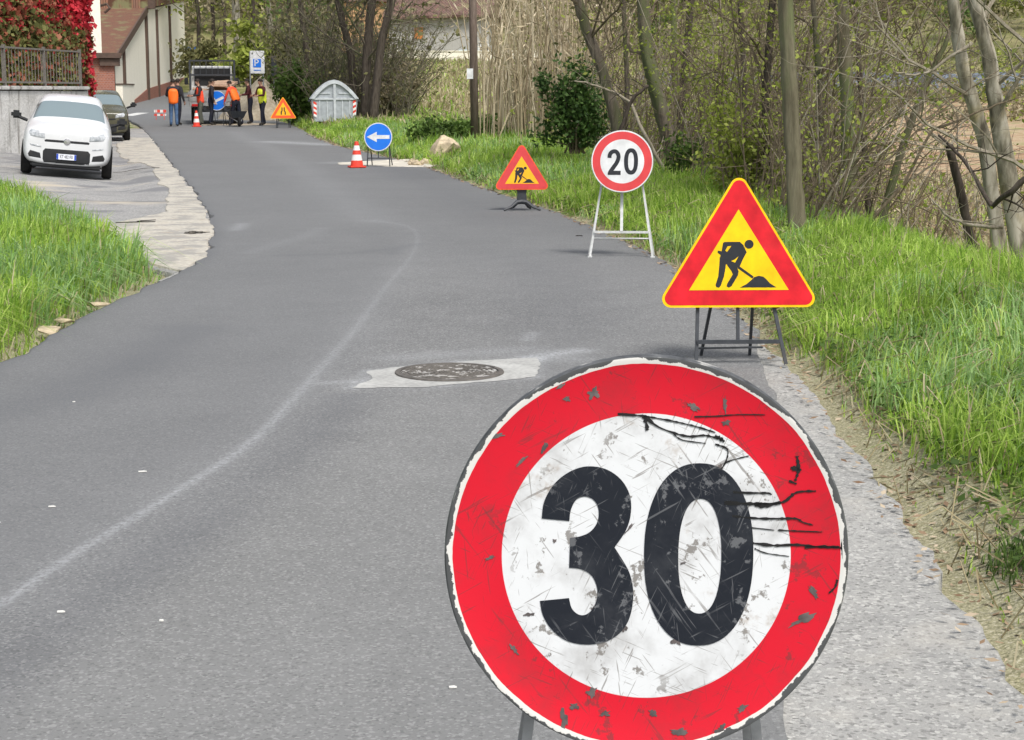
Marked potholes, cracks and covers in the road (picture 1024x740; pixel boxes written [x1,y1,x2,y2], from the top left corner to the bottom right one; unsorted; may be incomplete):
manhole cover [395,362,504,381]
